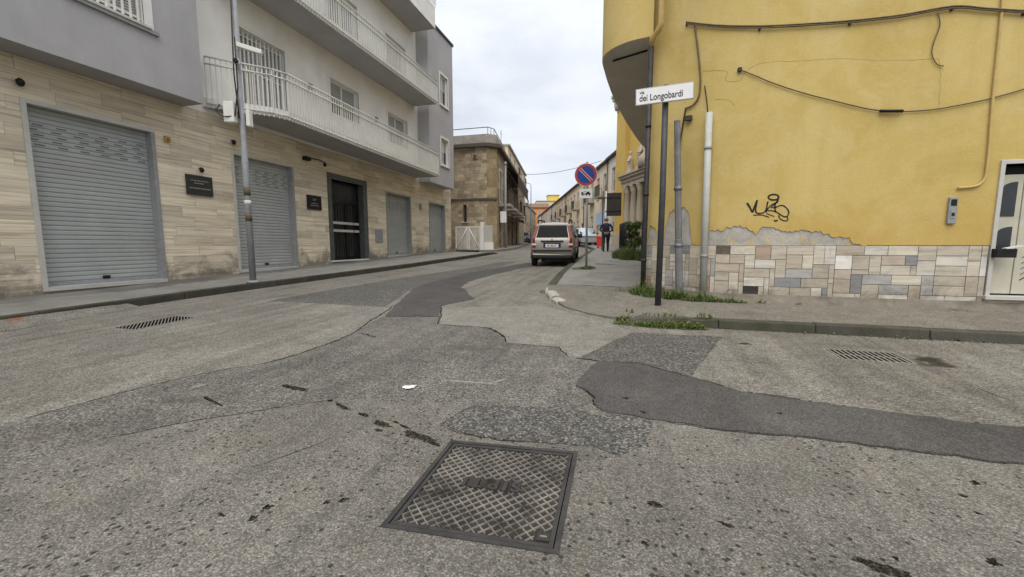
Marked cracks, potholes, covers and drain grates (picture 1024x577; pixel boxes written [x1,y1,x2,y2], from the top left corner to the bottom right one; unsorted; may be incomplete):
drain grate [113,316,196,330]
manhole cover [380,440,578,555]
drain grate [822,348,917,364]
